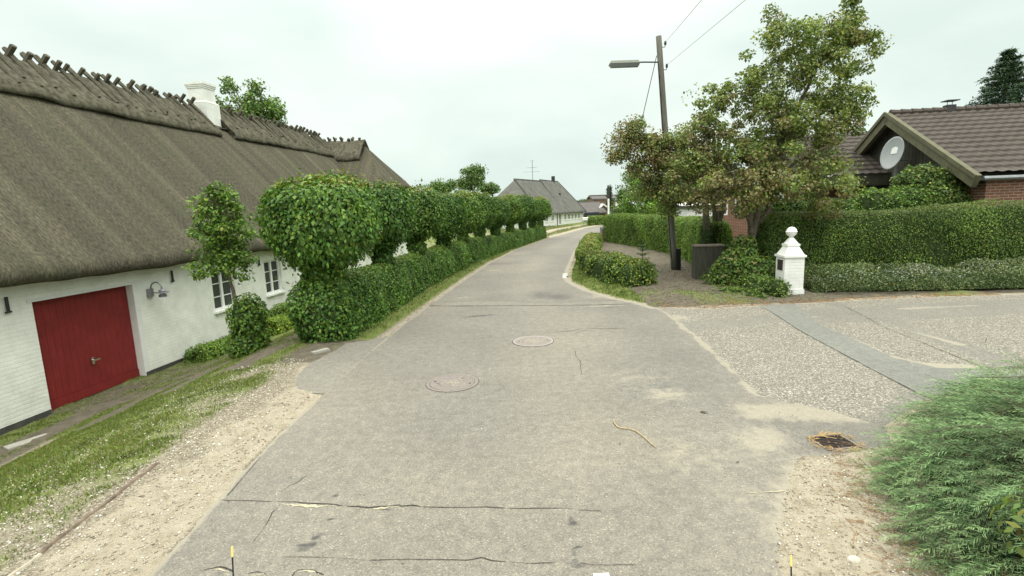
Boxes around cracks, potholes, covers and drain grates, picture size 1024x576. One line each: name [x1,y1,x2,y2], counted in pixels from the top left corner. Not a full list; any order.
crack [222,462,600,542]
drain grate [807,434,862,451]
manhole cover [425,374,479,392]
manhole cover [512,336,554,347]
crack [292,556,552,576]
